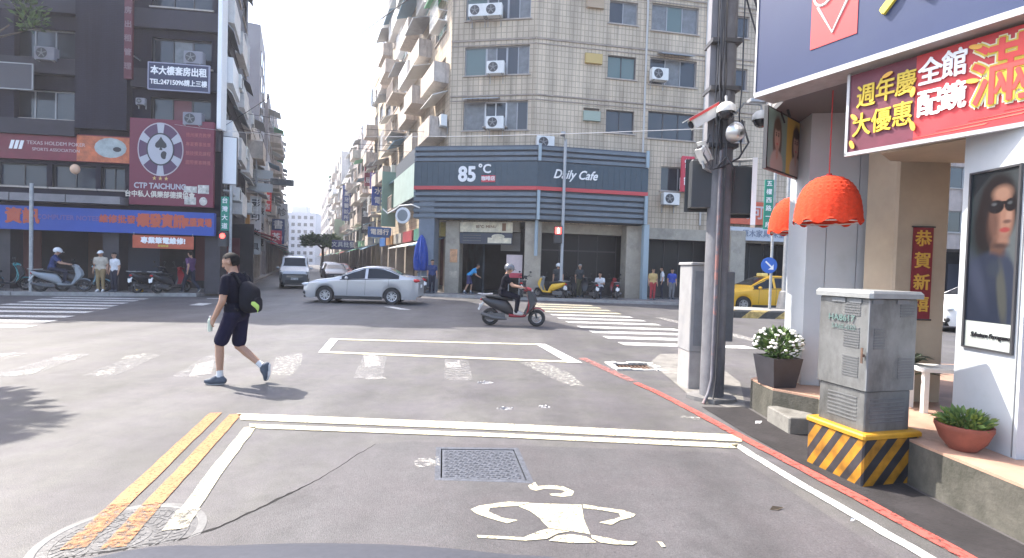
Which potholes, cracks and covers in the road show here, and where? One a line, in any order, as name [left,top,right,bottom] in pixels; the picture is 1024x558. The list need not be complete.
manhole cover [434,447,534,483]
manhole cover [24,503,207,558]
crack [62,444,375,558]
